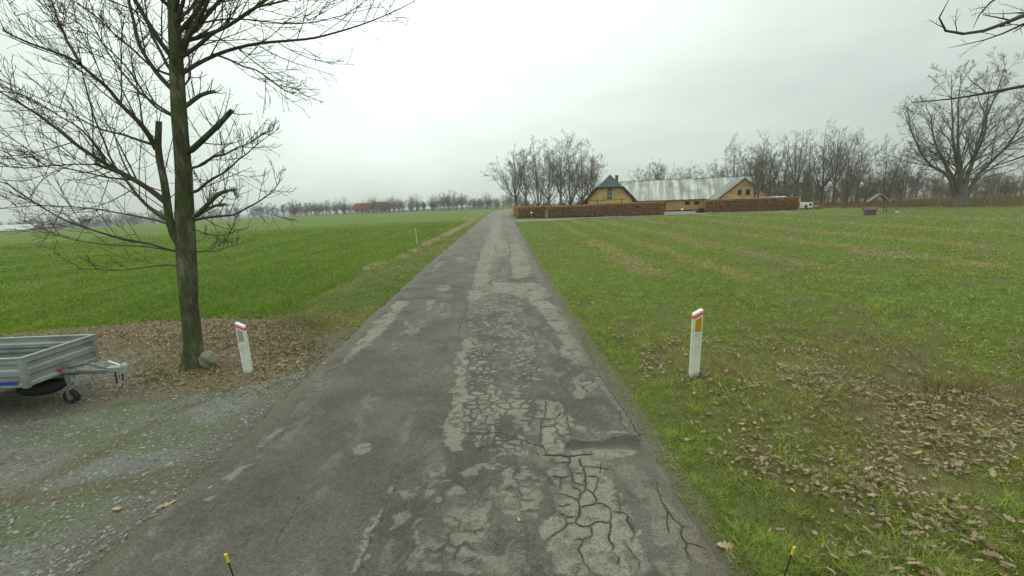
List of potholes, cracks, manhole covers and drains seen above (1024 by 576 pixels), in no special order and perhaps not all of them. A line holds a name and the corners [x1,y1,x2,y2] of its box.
crack [657,481,709,561]
crack [461,243,639,572]
